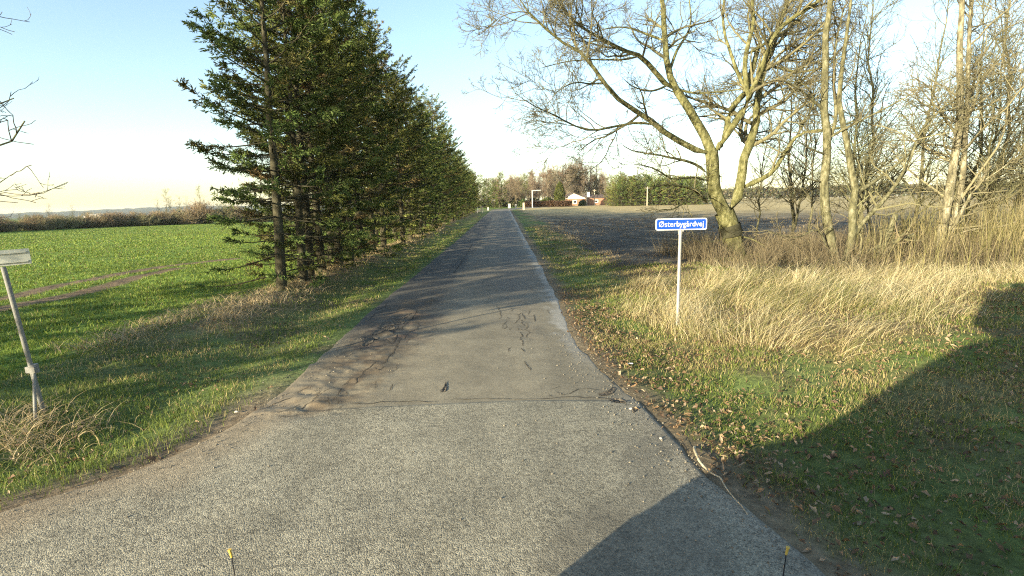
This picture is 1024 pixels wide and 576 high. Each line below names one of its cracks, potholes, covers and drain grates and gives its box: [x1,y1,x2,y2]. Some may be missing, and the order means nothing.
crack [256,304,419,413]
crack [495,306,548,370]
